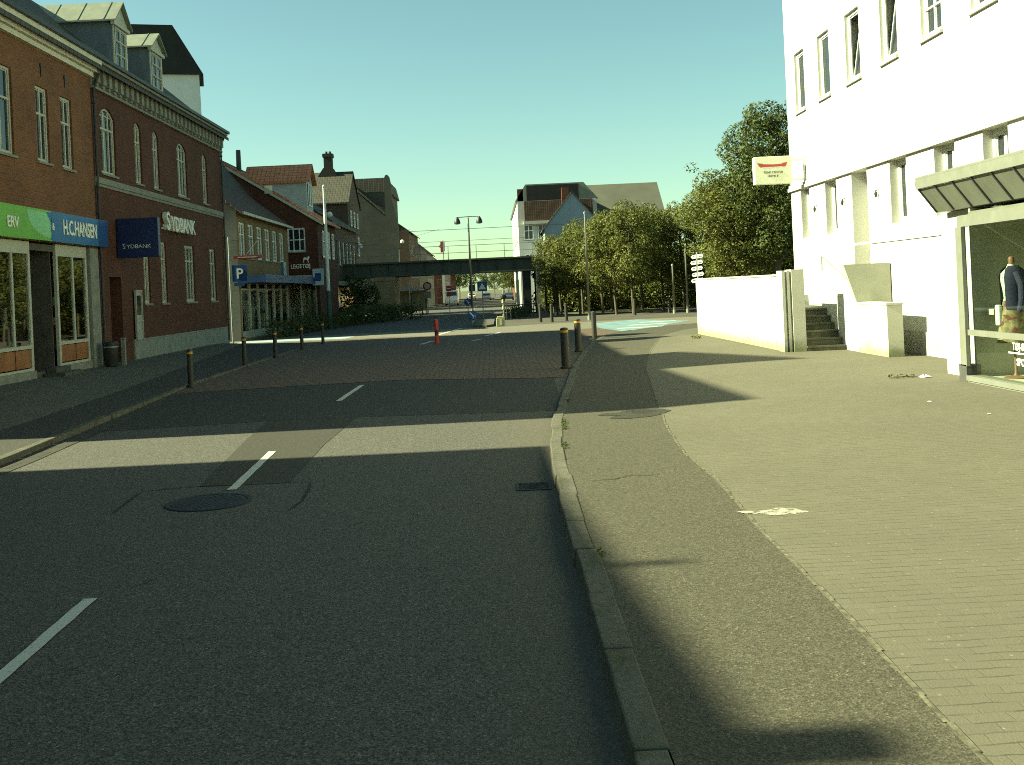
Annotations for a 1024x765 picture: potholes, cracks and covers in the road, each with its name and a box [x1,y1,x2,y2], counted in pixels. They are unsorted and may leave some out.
manhole cover [164,493,253,512]
drain grate [516,482,552,491]
